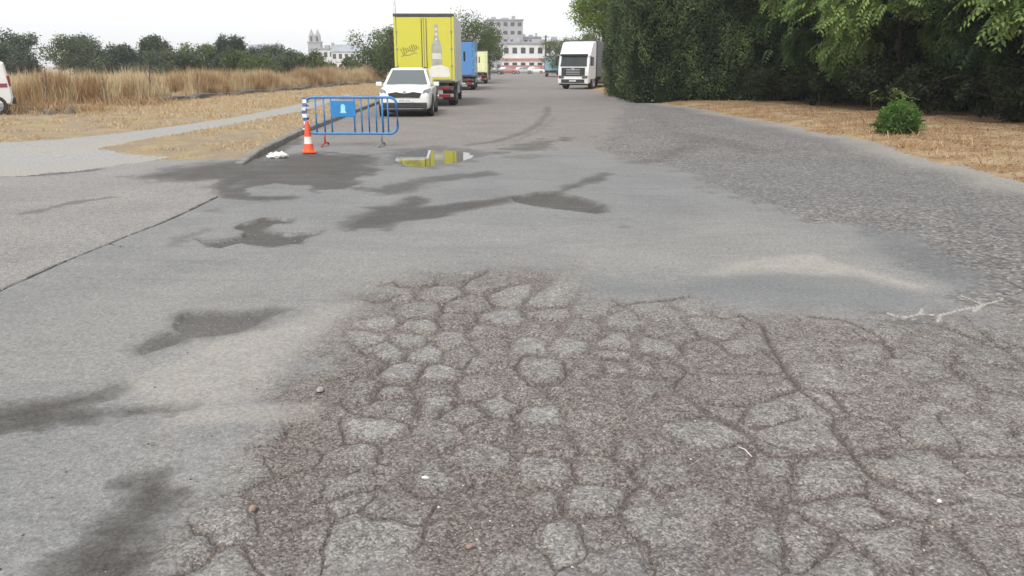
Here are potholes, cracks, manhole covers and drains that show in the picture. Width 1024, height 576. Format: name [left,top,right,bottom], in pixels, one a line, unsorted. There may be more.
crack [184,270,1024,576]
